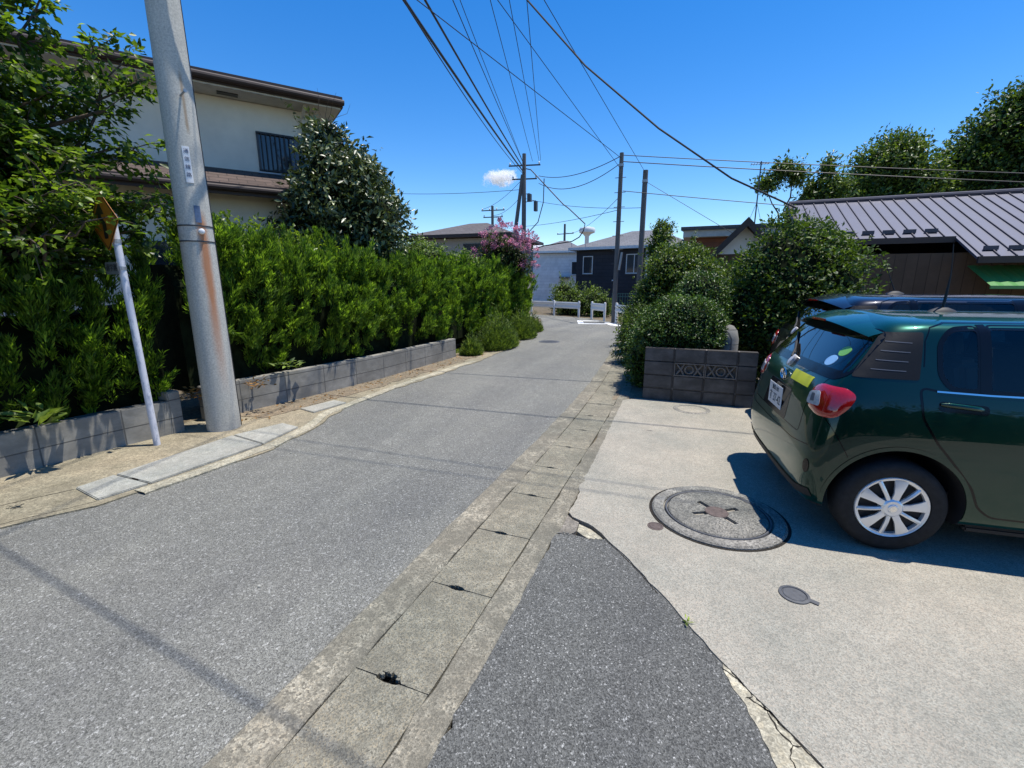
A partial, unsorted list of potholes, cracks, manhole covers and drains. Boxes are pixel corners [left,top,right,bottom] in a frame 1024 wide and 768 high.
pothole [379,669,401,685]
crack [722,662,823,768]
manhole cover [673,405,711,414]
manhole cover [647,522,664,530]
manhole cover [778,585,820,606]
